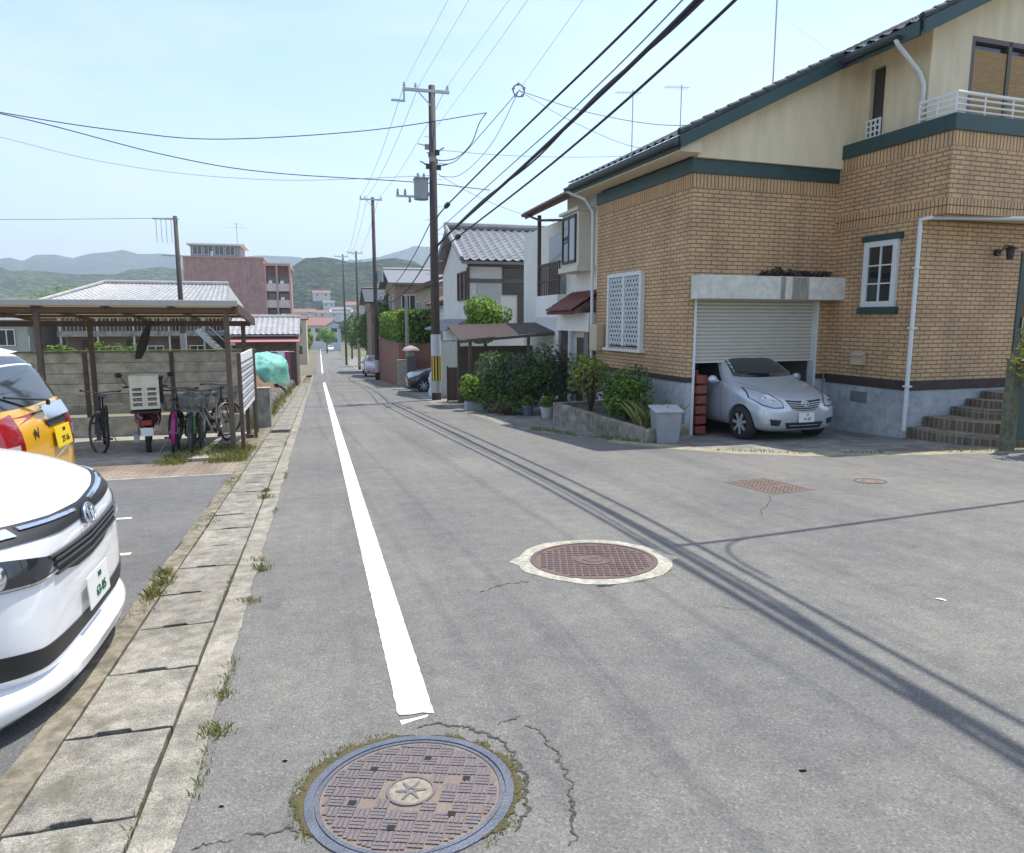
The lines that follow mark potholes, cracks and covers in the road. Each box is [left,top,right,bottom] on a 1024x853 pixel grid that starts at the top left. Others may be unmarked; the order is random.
manhole cover [304,735,514,853]
manhole cover [509,540,677,587]
crack [498,715,578,846]
utility cover [725,478,815,494]
